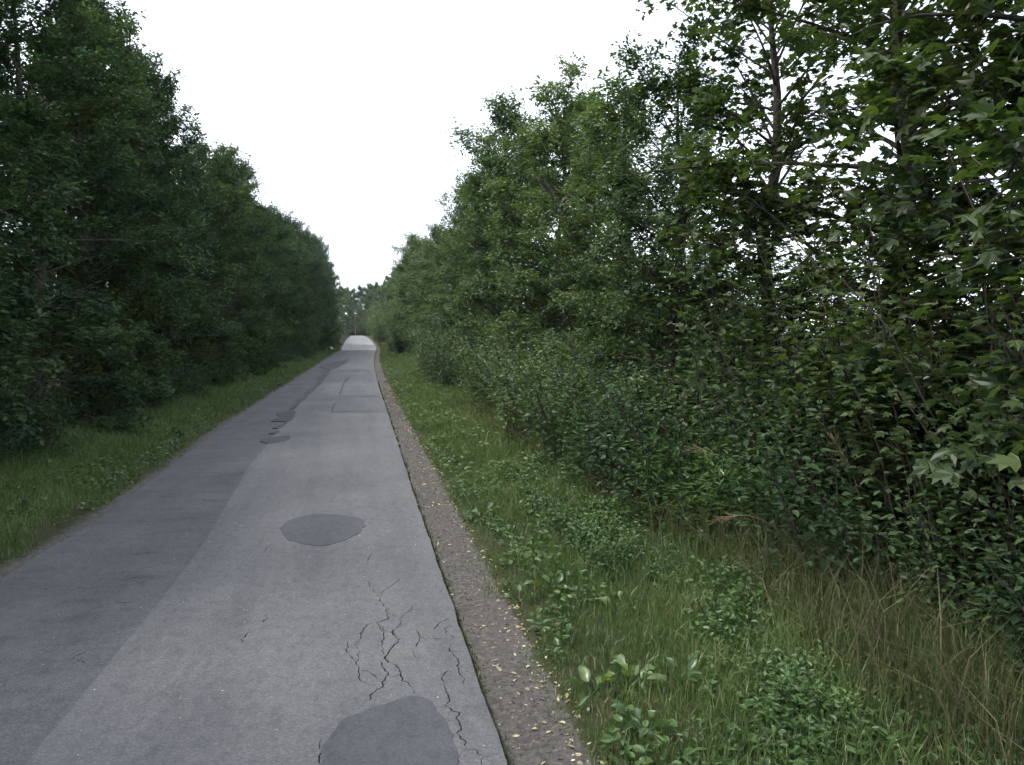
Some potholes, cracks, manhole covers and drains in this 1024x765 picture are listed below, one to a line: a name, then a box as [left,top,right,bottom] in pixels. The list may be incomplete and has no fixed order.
crack [346,555,482,764]
